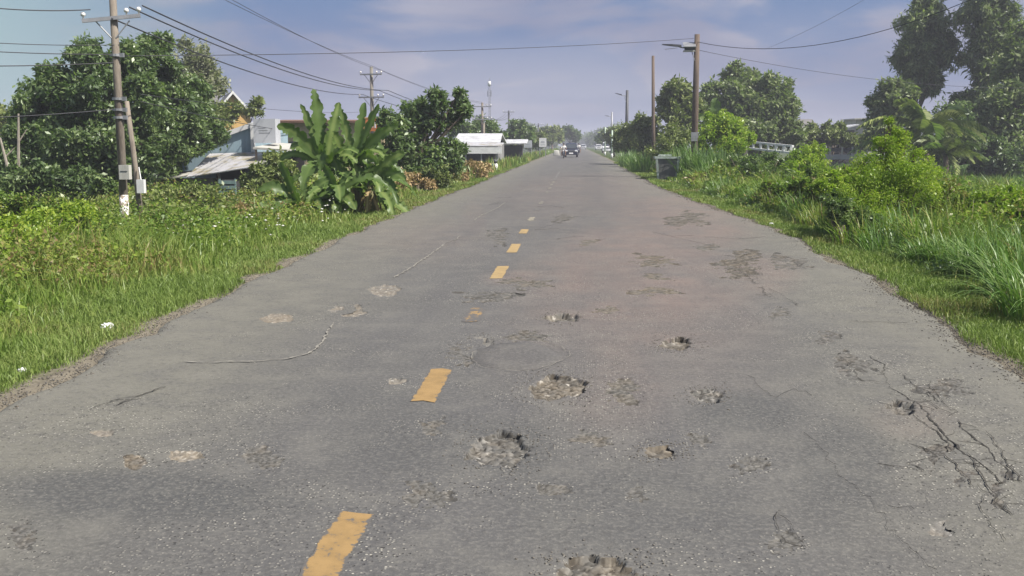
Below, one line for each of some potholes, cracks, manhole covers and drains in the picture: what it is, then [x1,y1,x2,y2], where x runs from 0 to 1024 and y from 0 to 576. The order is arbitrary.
crack [840,356,1022,541]
pothole [523,545,670,576]
pothole [648,333,704,355]
crack [94,387,161,407]
pothole [676,383,740,410]
pothole [513,369,595,407]
pothole [533,310,589,325]
pothole [447,422,550,479]
